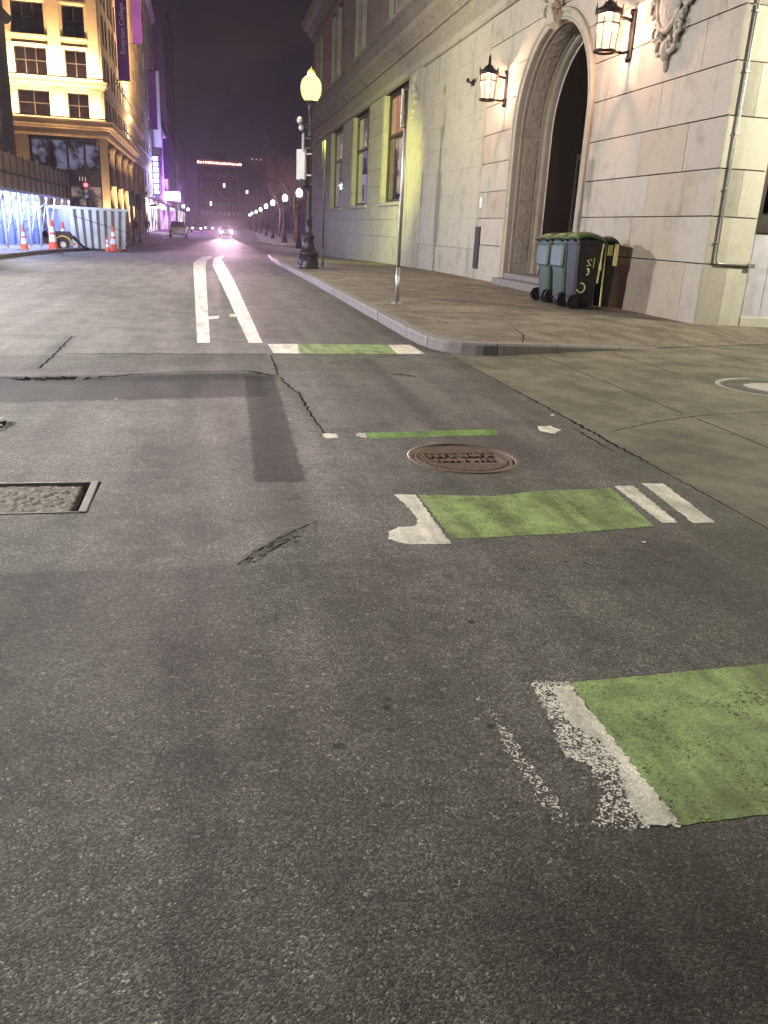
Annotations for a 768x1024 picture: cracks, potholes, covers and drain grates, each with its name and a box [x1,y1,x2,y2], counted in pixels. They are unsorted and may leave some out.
crack [241,355,326,434]
manhole cover [407,443,521,474]
manhole cover [0,481,99,515]
manhole cover [715,378,768,396]
crack [238,521,315,565]
